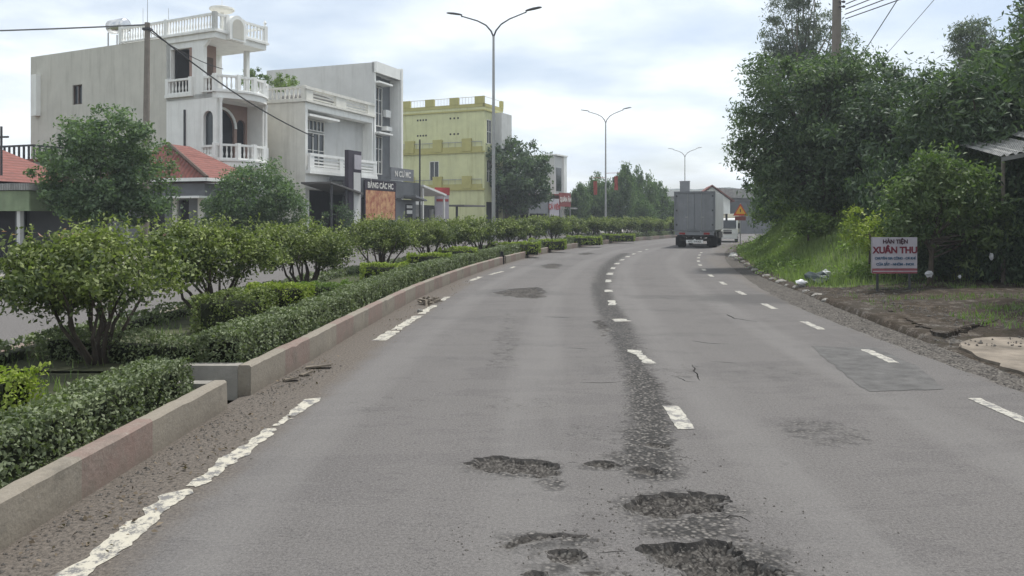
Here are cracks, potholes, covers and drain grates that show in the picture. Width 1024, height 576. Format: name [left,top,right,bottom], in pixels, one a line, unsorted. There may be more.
pothole [463,455,562,480]
pothole [635,539,788,576]
pothole [496,533,588,551]
pothole [621,491,733,521]
pothole [544,548,588,566]
pothole [583,460,622,470]
